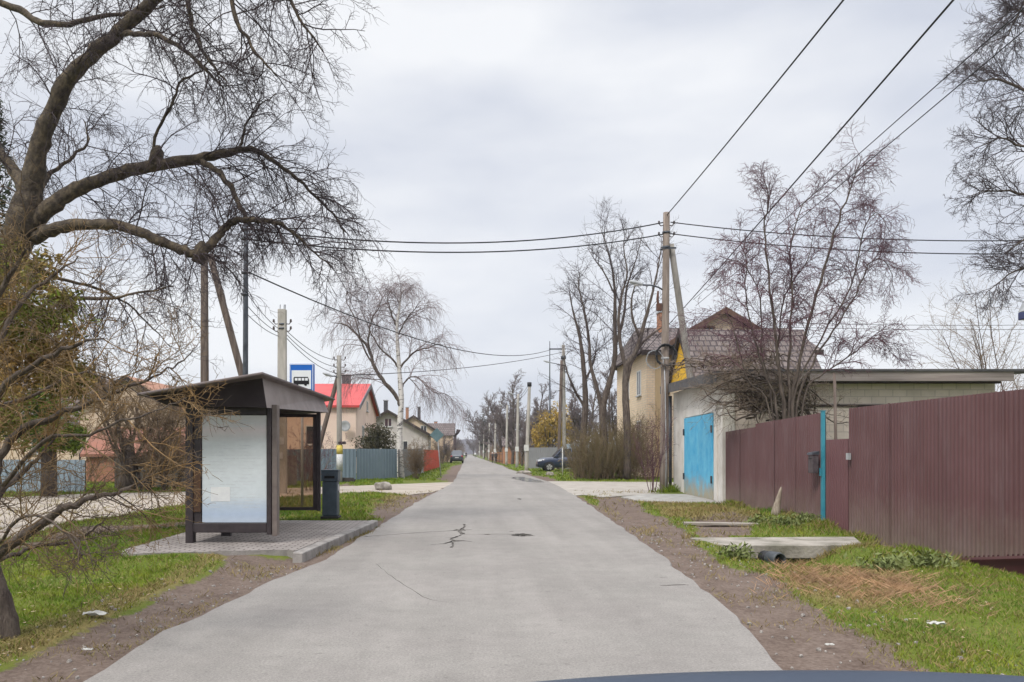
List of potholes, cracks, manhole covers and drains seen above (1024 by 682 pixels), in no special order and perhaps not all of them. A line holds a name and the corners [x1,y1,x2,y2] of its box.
crack [365,524,515,548]
